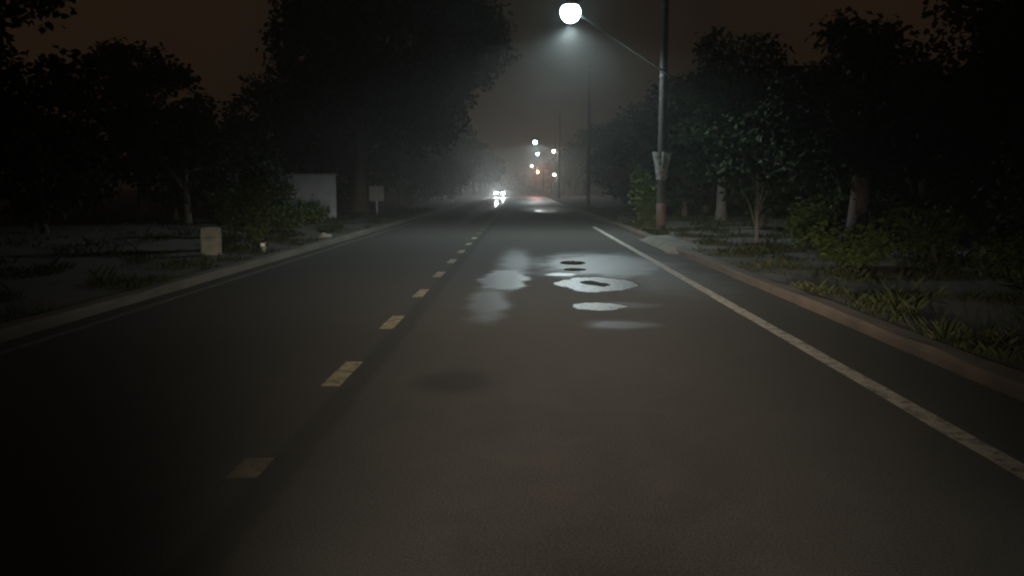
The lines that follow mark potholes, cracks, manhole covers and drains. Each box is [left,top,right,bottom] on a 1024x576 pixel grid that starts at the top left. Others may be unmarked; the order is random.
pothole [553,276,640,292]
